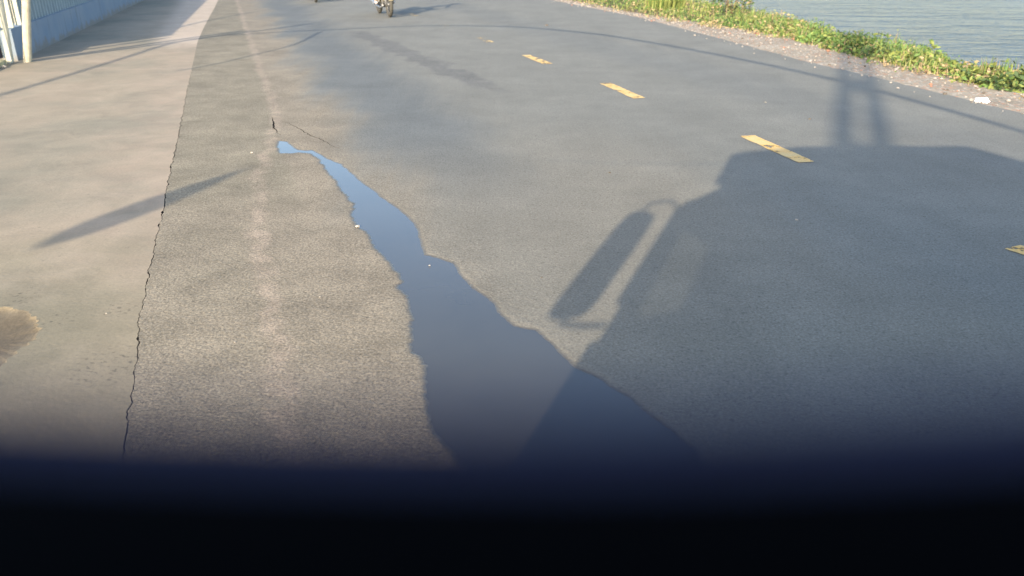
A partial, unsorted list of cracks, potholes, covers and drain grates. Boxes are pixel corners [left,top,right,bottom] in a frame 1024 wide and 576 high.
crack [130,11,213,401]
